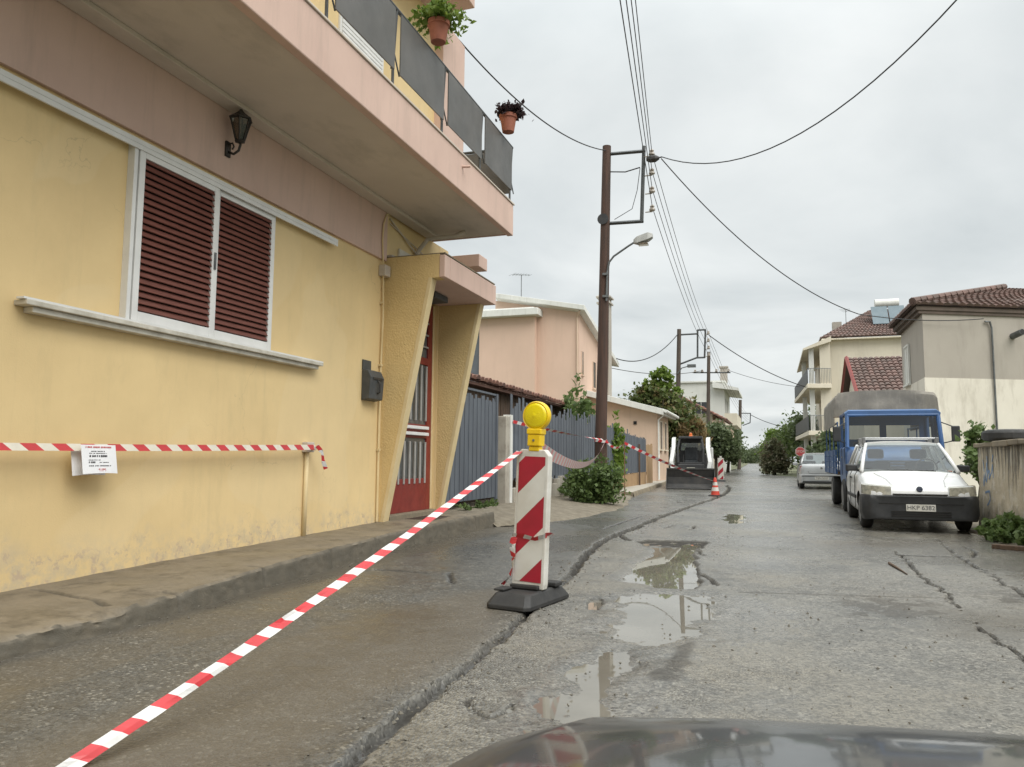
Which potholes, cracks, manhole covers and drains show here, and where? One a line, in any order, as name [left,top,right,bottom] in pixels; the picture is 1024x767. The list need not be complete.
pothole [608,539,720,589]
pothole [585,597,608,610]
crack [894,538,1024,663]
